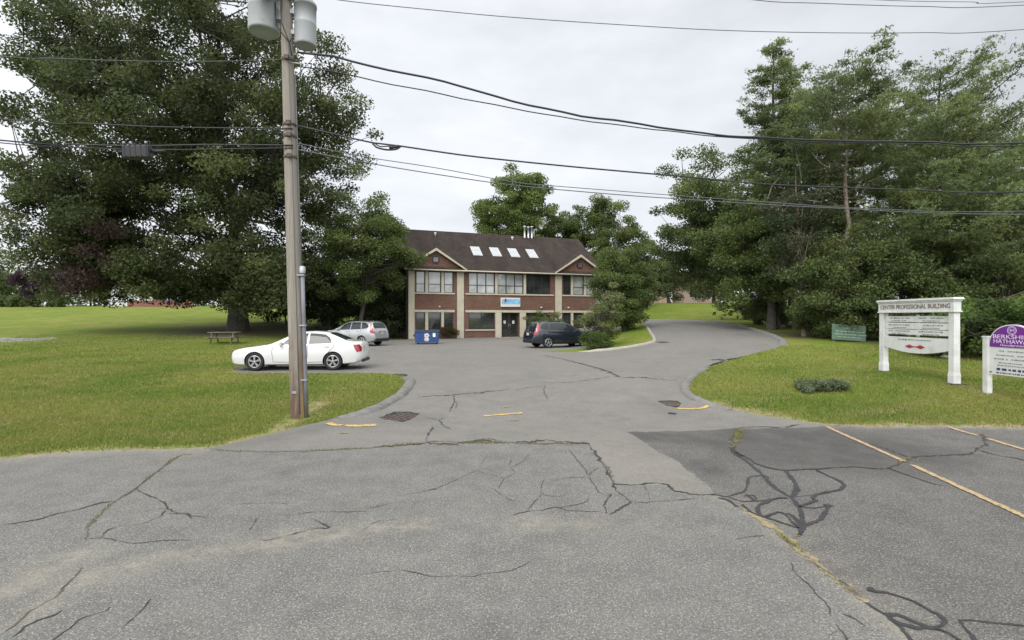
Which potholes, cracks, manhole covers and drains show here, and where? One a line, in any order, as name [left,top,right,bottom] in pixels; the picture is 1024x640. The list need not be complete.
crack [364,559,534,577]
crack [212,355,714,515]
crack [791,563,865,640]
crack [5,452,404,543]
crack [0,567,151,640]
drain grate [379,411,421,422]
